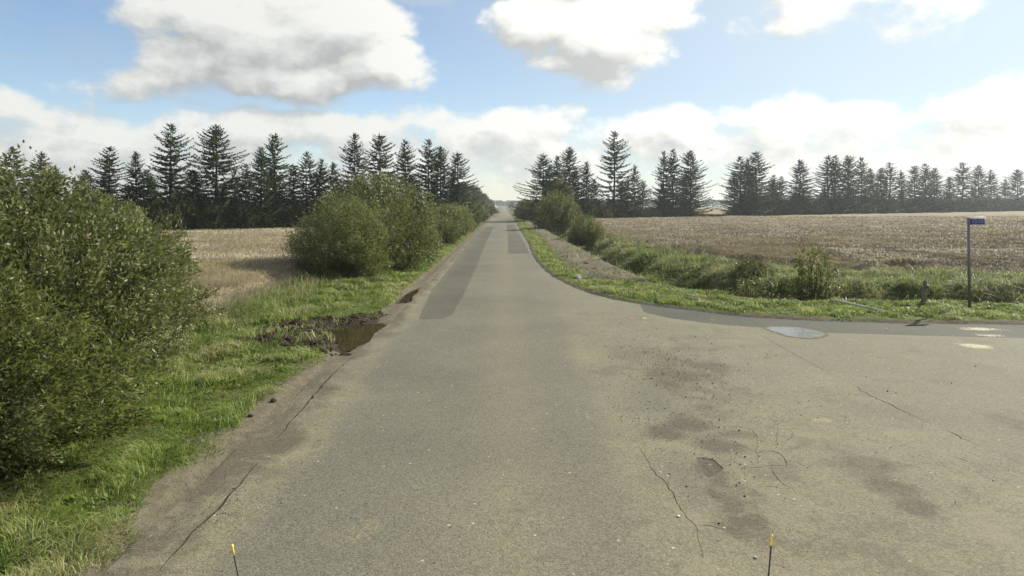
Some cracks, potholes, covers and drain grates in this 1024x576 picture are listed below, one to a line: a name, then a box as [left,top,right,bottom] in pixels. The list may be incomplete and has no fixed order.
crack [279,358,352,436]
crack [160,463,258,569]
crack [732,416,801,492]
crack [638,444,724,555]
pothole [696,457,723,478]
